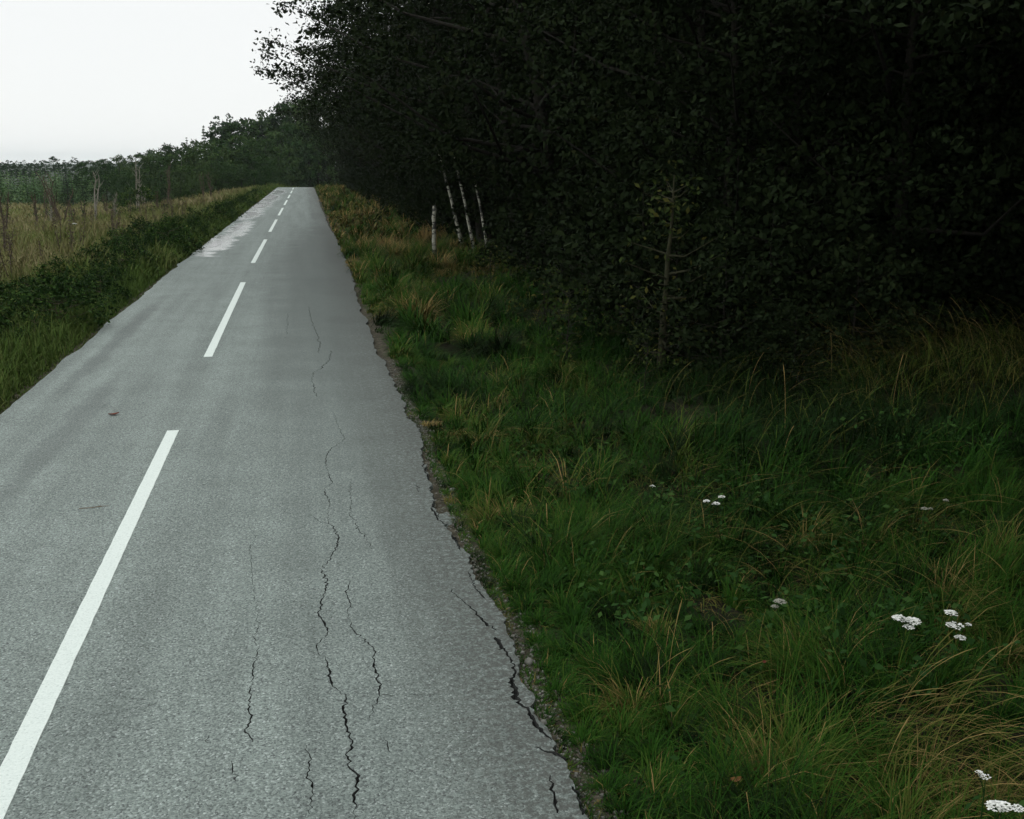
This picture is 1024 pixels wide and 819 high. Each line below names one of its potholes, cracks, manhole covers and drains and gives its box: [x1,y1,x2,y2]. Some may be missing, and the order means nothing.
crack [305,749,314,814]
crack [244,540,261,742]
crack [451,572,585,813]
crack [314,416,430,819]
